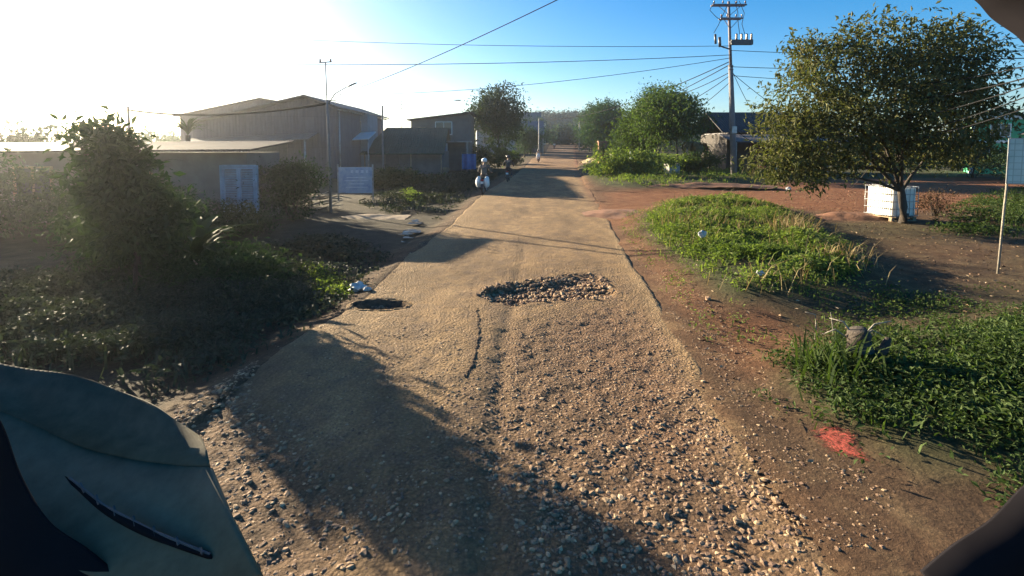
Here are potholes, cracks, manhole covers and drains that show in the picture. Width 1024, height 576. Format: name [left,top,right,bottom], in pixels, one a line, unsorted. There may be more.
crack [465,308,481,377]
pothole [471,271,624,309]
pothole [346,299,413,312]
